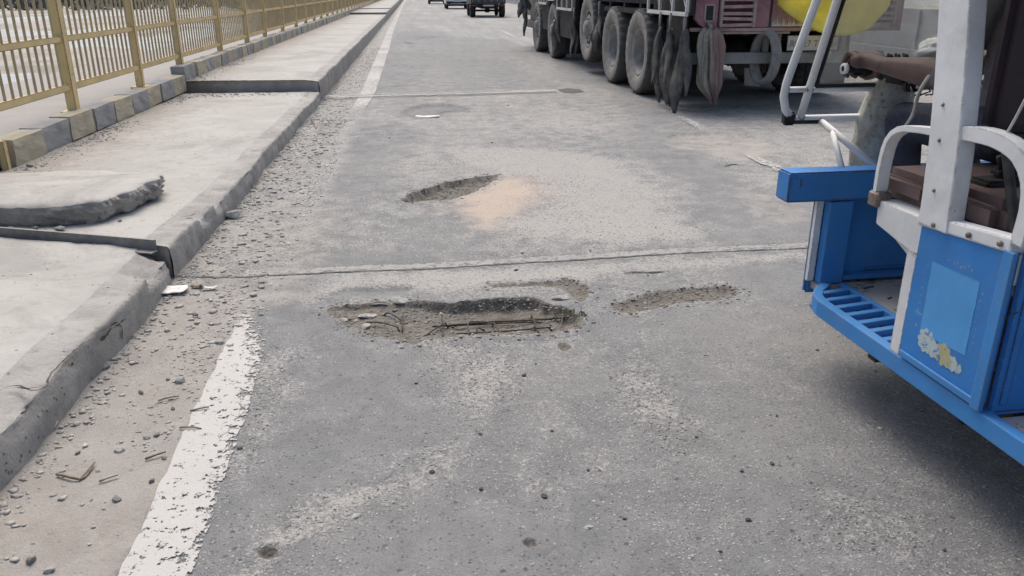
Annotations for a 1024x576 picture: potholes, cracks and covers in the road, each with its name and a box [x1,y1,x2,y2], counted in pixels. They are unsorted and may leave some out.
pothole [387,173,511,207]
pothole [597,282,754,319]
pothole [473,274,605,308]
pothole [314,294,597,351]
